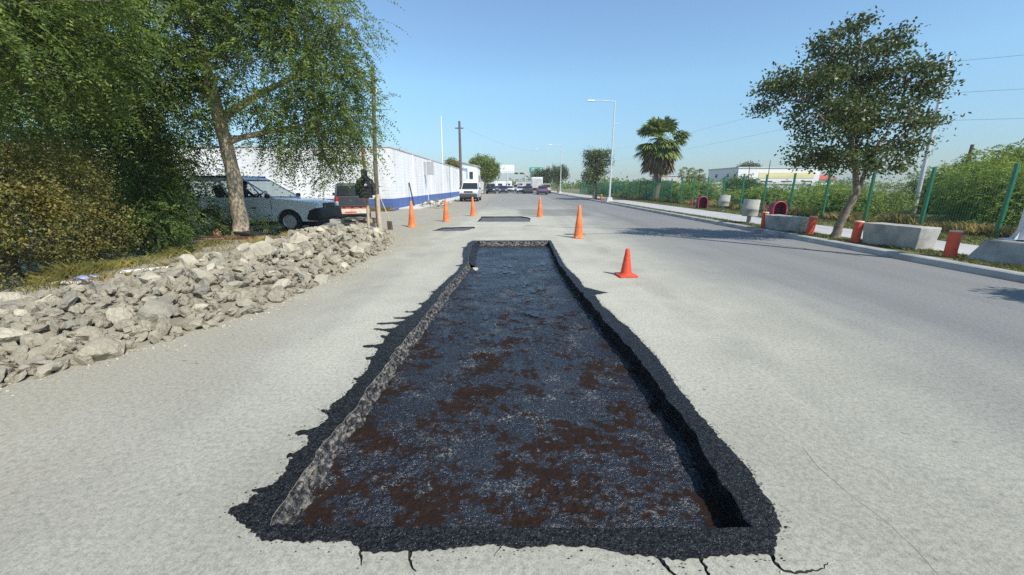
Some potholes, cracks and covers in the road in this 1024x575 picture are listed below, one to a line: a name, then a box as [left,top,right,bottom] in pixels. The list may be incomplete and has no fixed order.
crack [698,557,710,575]
crack [408,551,416,572]
crack [769,554,828,574]
crack [658,559,677,575]
pothole [220,240,792,571]
crack [803,448,939,575]
